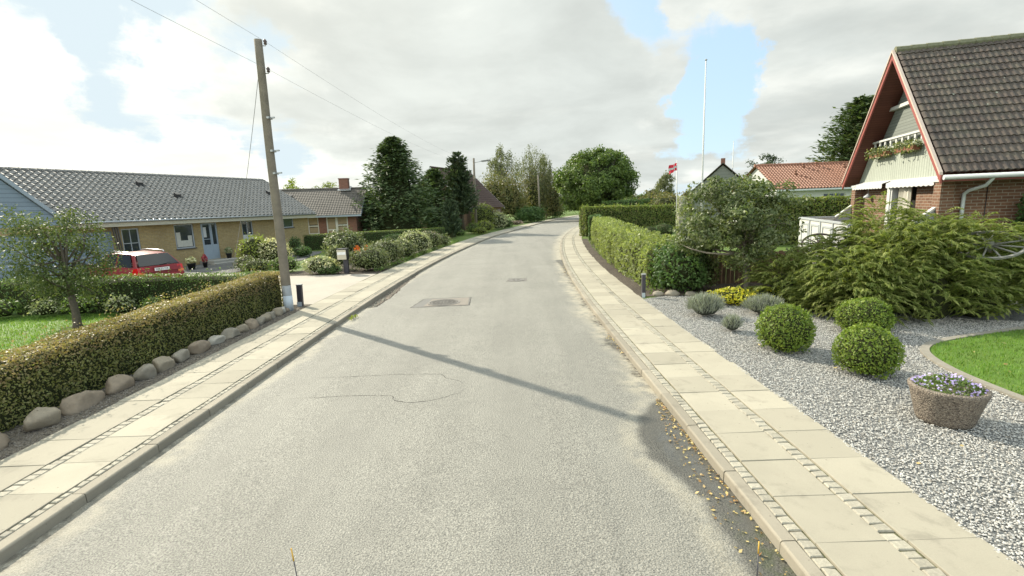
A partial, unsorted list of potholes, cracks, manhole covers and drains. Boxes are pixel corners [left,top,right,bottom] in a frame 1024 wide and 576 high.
manhole cover [410,297,471,308]
crack [290,374,468,403]
